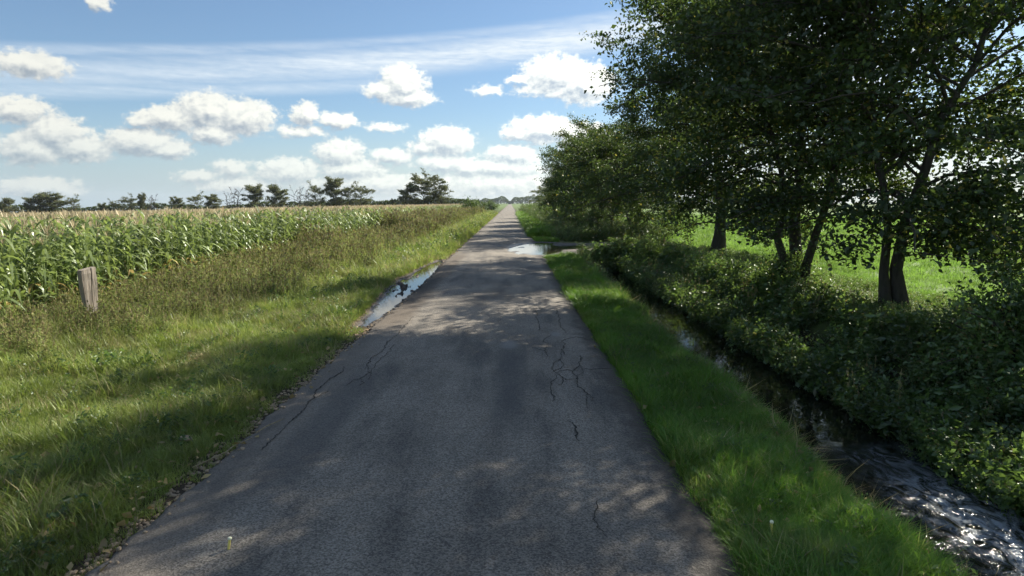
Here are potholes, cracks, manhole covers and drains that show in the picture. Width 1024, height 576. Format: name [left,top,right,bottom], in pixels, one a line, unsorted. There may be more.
crack [261,317,412,450]
crack [535,311,611,404]
